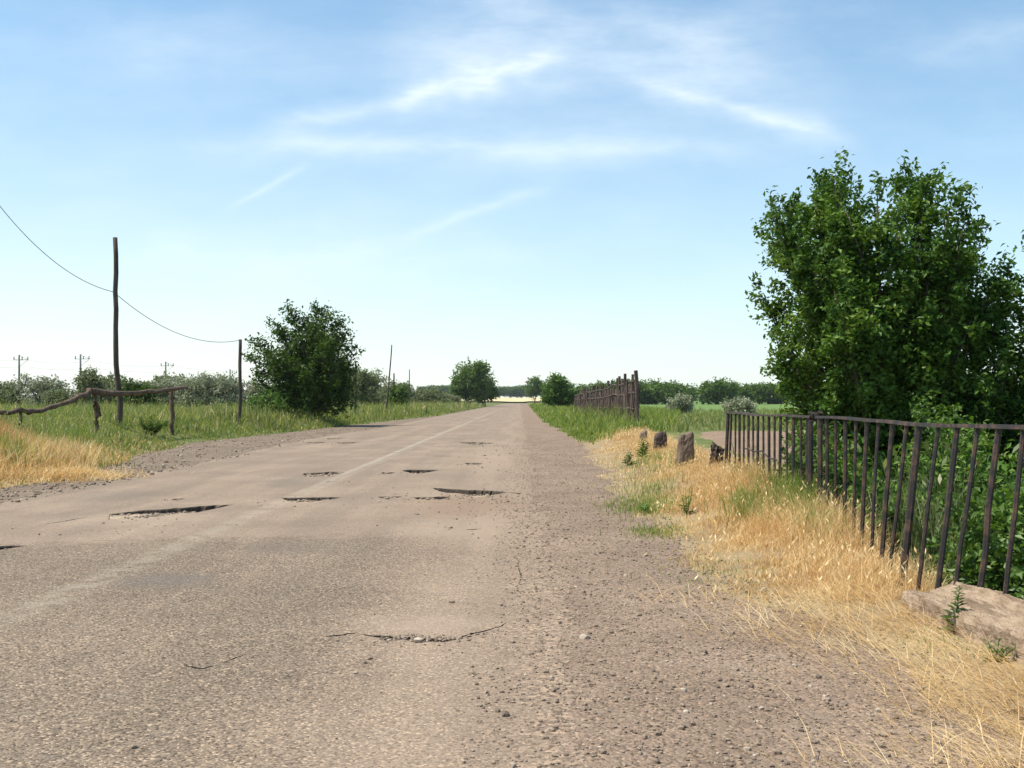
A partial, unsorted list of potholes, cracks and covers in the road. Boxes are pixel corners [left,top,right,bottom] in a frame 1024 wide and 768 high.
crack [184,654,246,669]
crack [327,623,506,642]
pothole [108,505,229,521]
pothole [433,488,506,497]
